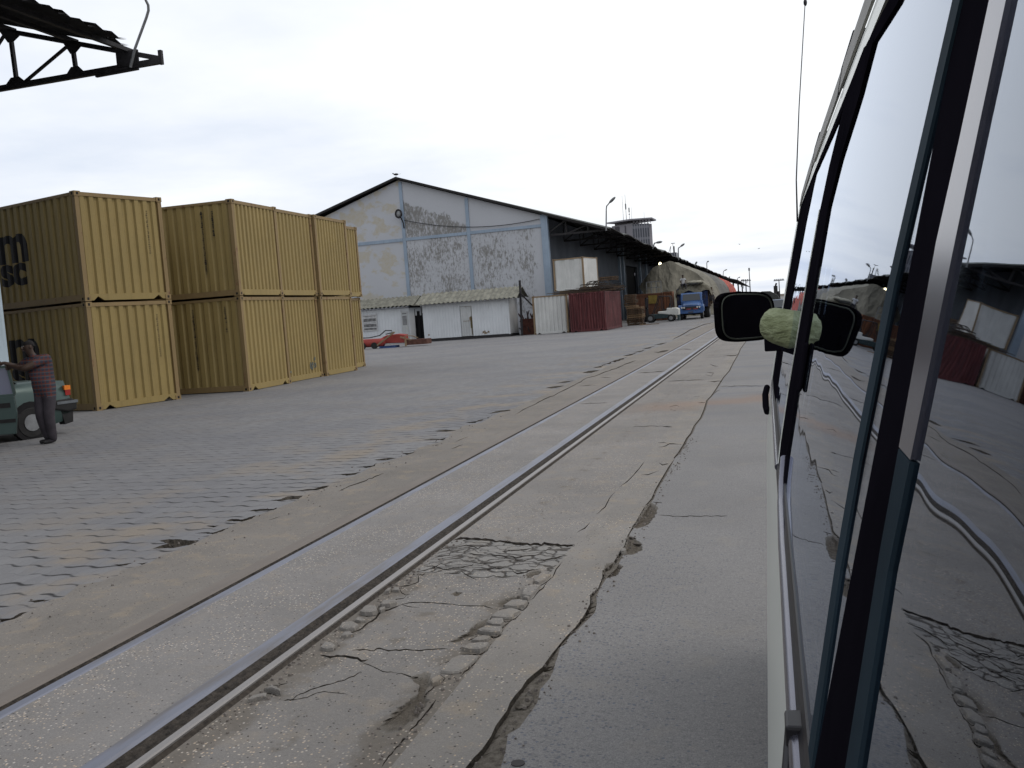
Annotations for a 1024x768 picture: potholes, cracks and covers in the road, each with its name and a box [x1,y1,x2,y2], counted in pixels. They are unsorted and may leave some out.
pothole [153,539,199,549]
crack [267,405,682,701]
pothole [496,596,523,607]
pothole [450,618,488,643]
pothole [632,502,659,529]
pothole [620,536,643,555]
